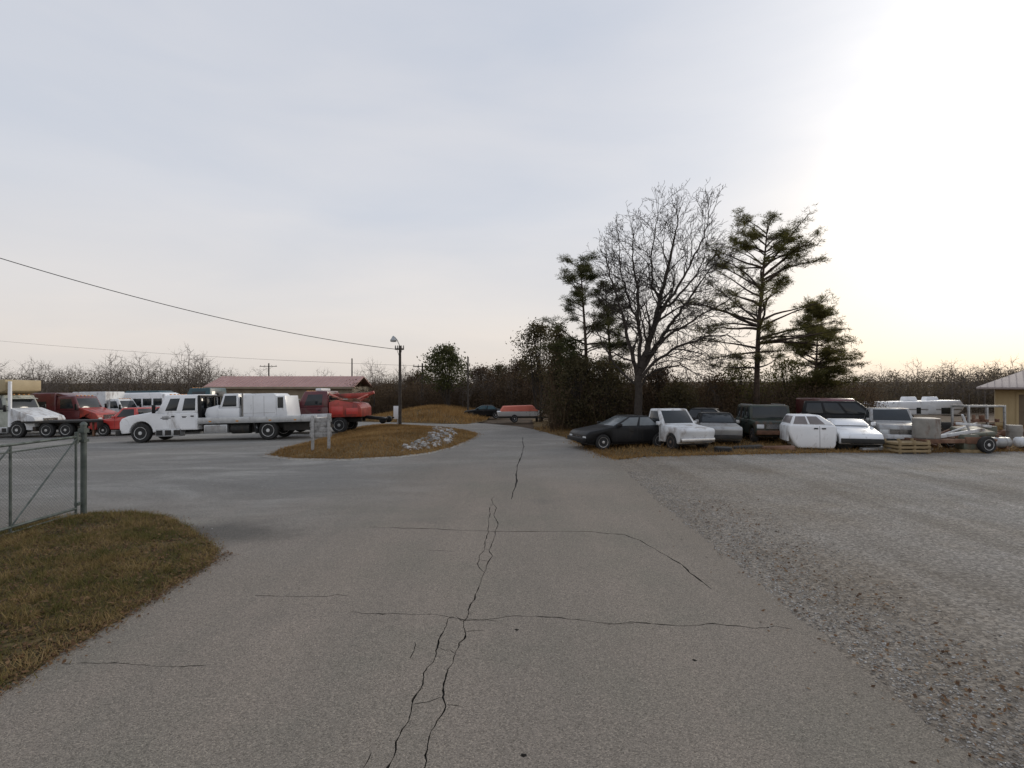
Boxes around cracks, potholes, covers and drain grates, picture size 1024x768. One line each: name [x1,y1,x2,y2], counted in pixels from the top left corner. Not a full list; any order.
crack [358,499,790,768]
